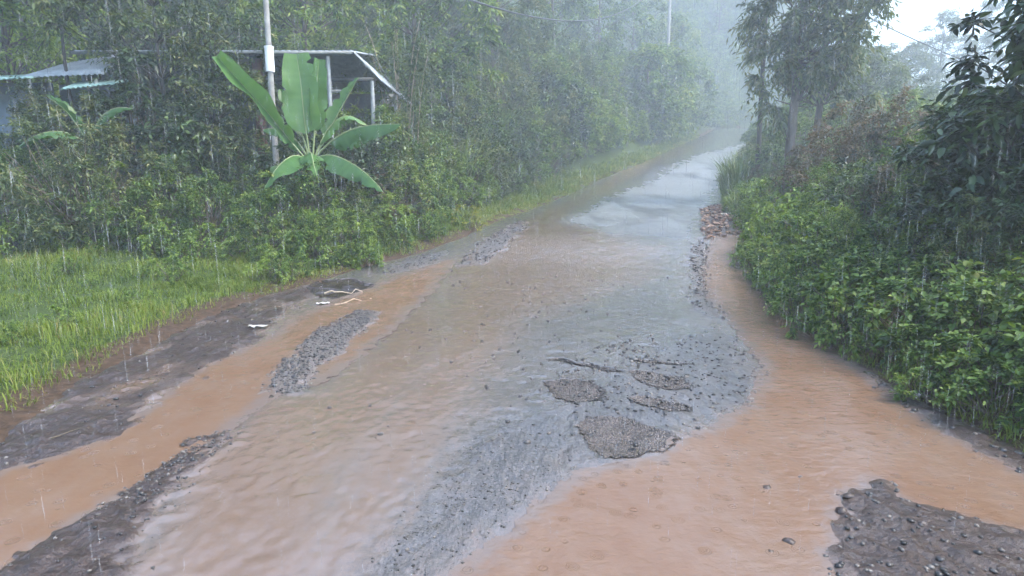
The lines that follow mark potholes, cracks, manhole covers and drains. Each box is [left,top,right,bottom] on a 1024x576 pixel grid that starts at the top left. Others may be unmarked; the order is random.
pothole [307,278,374,299]
